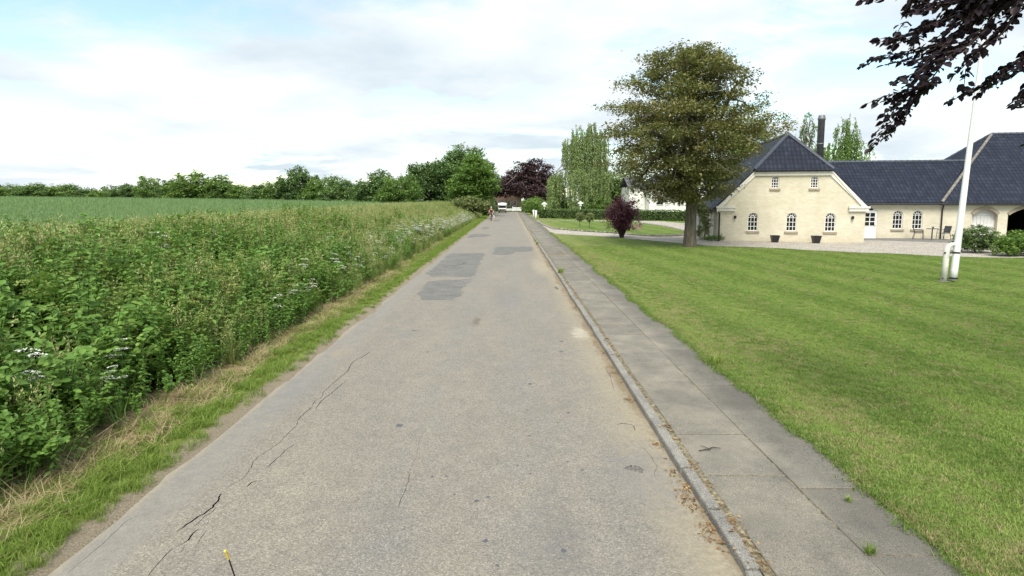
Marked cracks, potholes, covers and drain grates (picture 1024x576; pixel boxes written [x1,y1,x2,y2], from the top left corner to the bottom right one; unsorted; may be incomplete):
crack [148,493,222,576]
crack [229,353,368,490]
